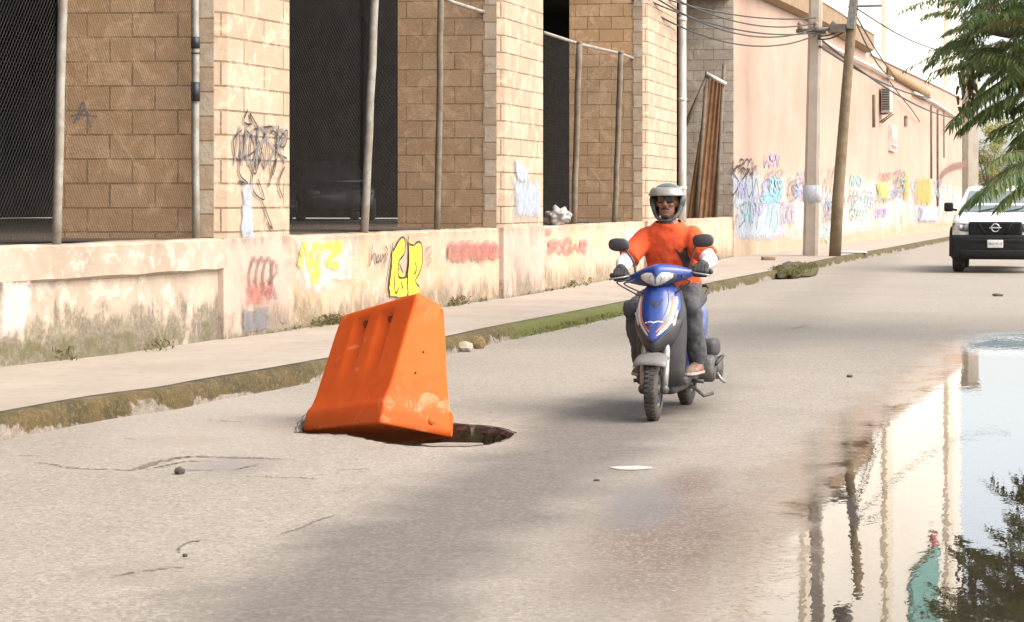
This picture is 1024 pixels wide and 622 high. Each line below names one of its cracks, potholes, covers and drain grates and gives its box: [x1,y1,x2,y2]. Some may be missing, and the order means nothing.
crack [35,455,319,479]
pothole [294,414,517,447]
crack [114,539,203,576]
